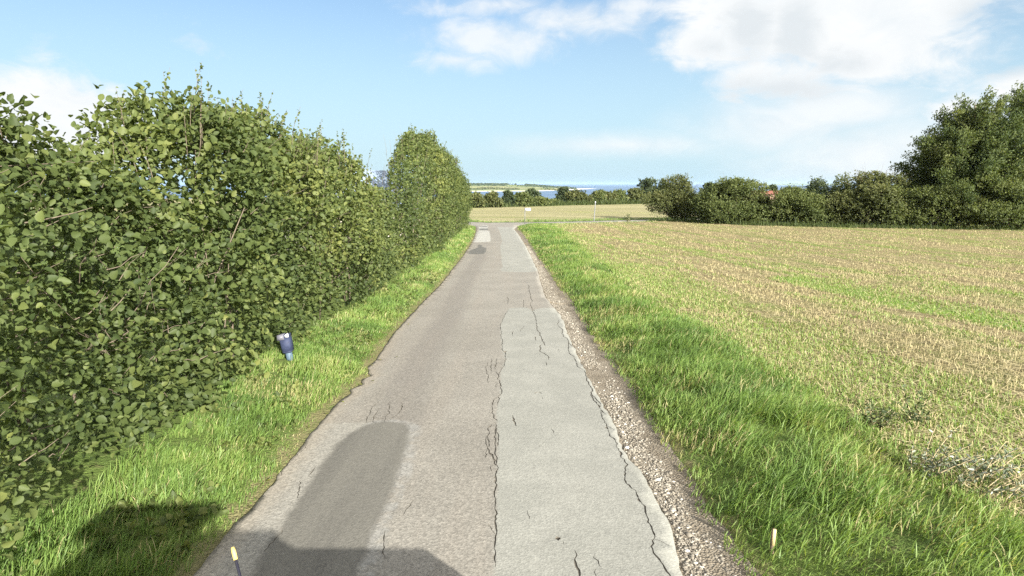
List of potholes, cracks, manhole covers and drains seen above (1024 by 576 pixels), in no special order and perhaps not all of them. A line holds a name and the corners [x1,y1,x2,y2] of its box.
crack [366,401,403,422]
crack [485,285,671,576]
crack [278,445,315,498]
